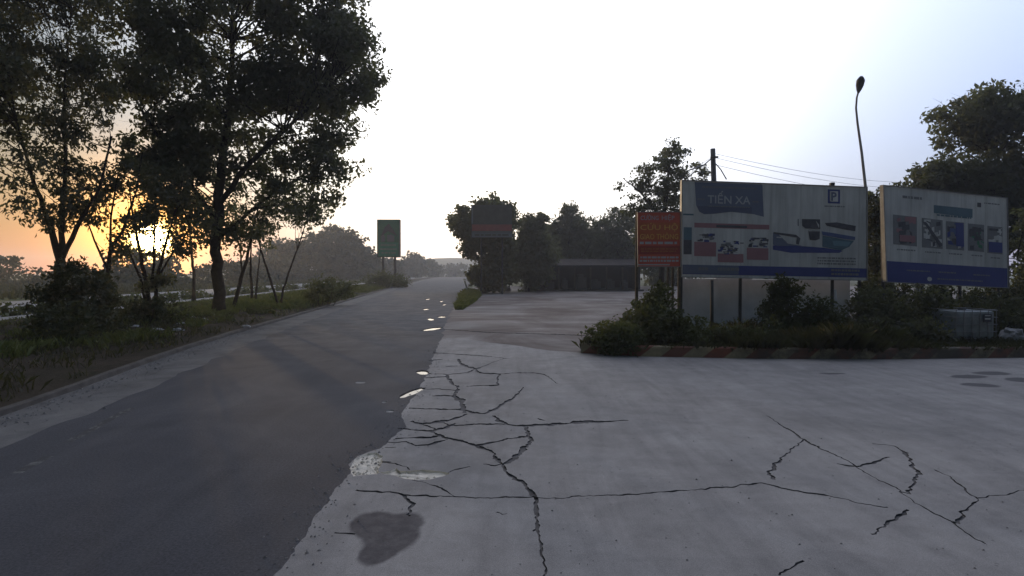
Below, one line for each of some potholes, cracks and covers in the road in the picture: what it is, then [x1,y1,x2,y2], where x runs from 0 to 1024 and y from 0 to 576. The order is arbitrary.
pothole [378,468,450,480]
pothole [350,453,383,476]
crack [335,353,1023,576]
